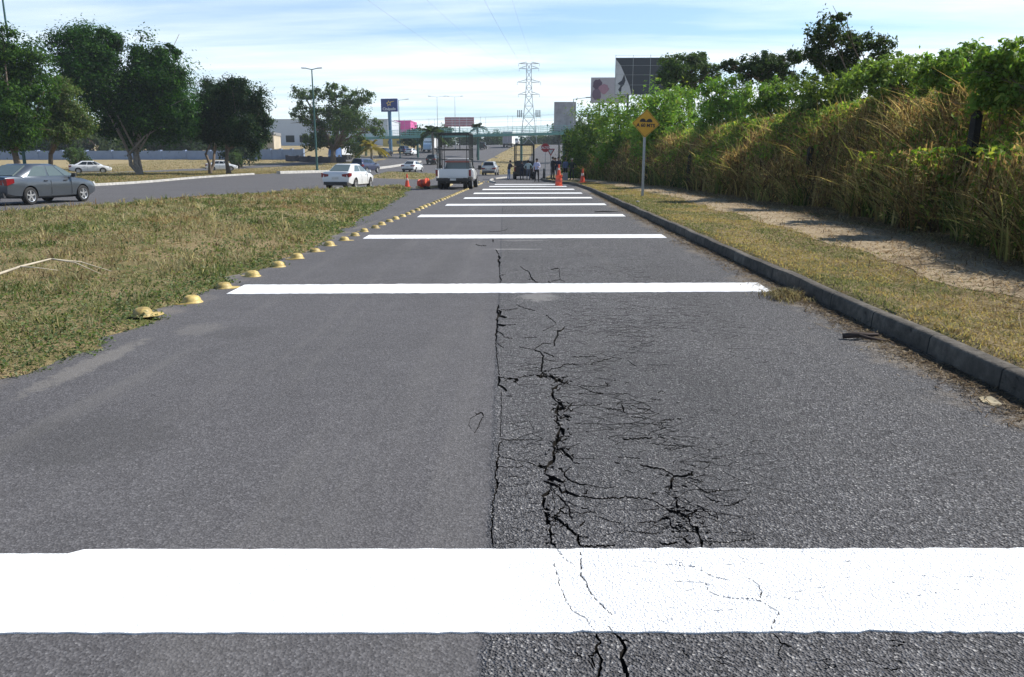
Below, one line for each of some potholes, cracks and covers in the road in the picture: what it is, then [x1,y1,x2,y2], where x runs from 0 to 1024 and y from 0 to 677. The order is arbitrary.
crack [469,241,905,677]
crack [475,229,563,283]
